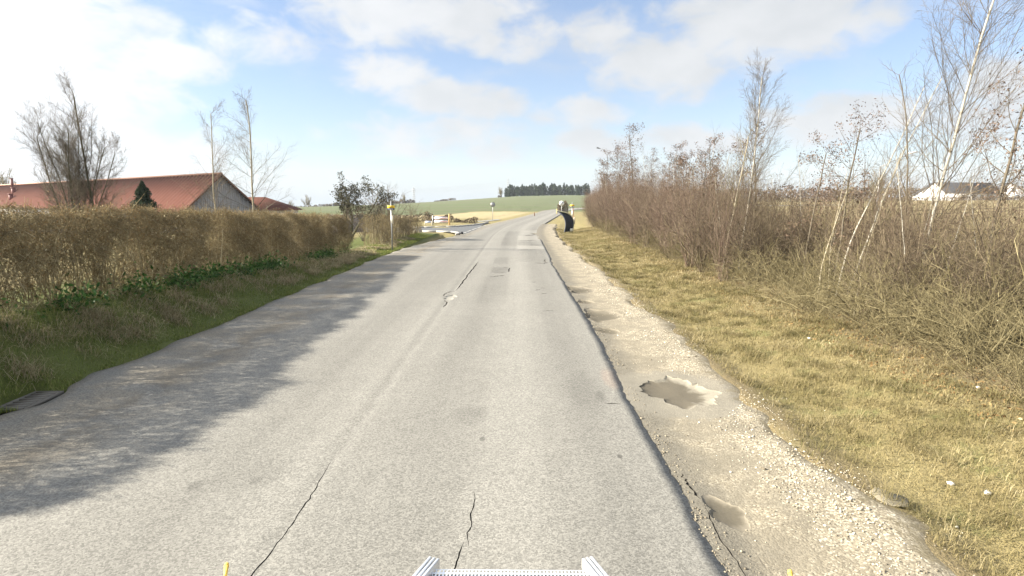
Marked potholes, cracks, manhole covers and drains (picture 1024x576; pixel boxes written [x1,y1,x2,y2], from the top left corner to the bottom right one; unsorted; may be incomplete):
pothole [701,494,751,532]
crack [251,462,331,576]
pothole [639,375,722,410]
crack [452,493,475,575]
pothole [584,308,623,323]
crack [681,473,746,576]
drain grate [0,391,64,415]
